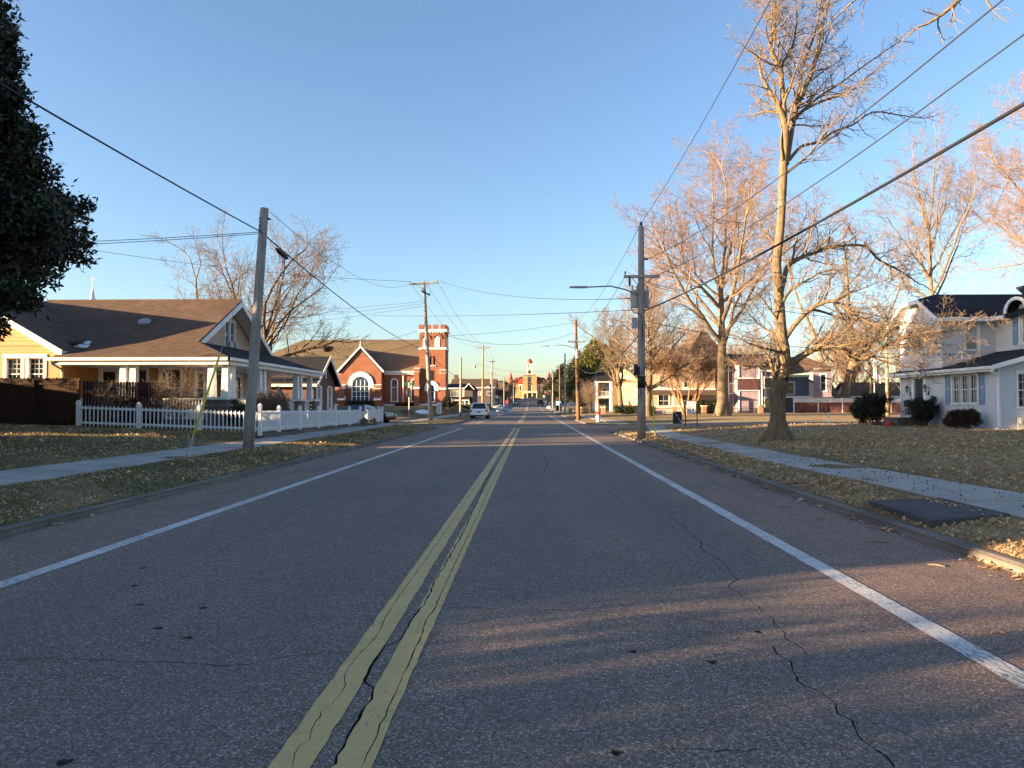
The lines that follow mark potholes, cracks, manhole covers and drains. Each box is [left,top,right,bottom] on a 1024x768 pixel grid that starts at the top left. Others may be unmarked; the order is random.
crack [669,516,924,768]
